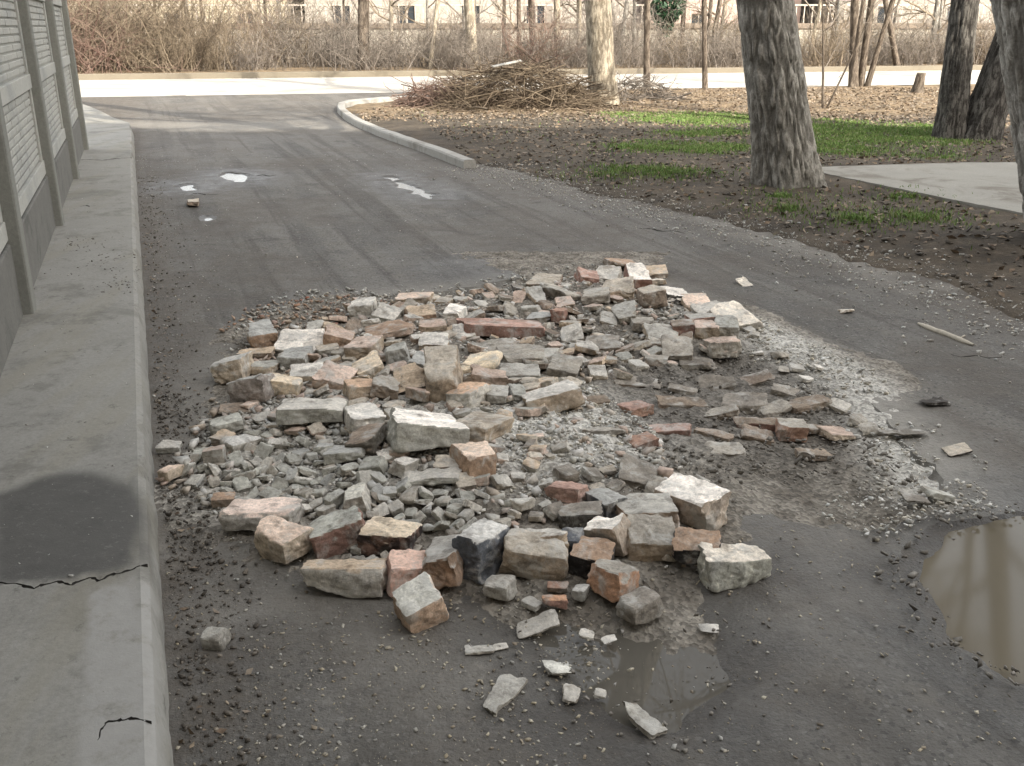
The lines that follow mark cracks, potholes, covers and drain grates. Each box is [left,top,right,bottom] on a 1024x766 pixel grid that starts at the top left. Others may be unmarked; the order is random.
crack [98,716,152,739]
crack [0,564,148,589]
pothole [897,510,1024,688]
